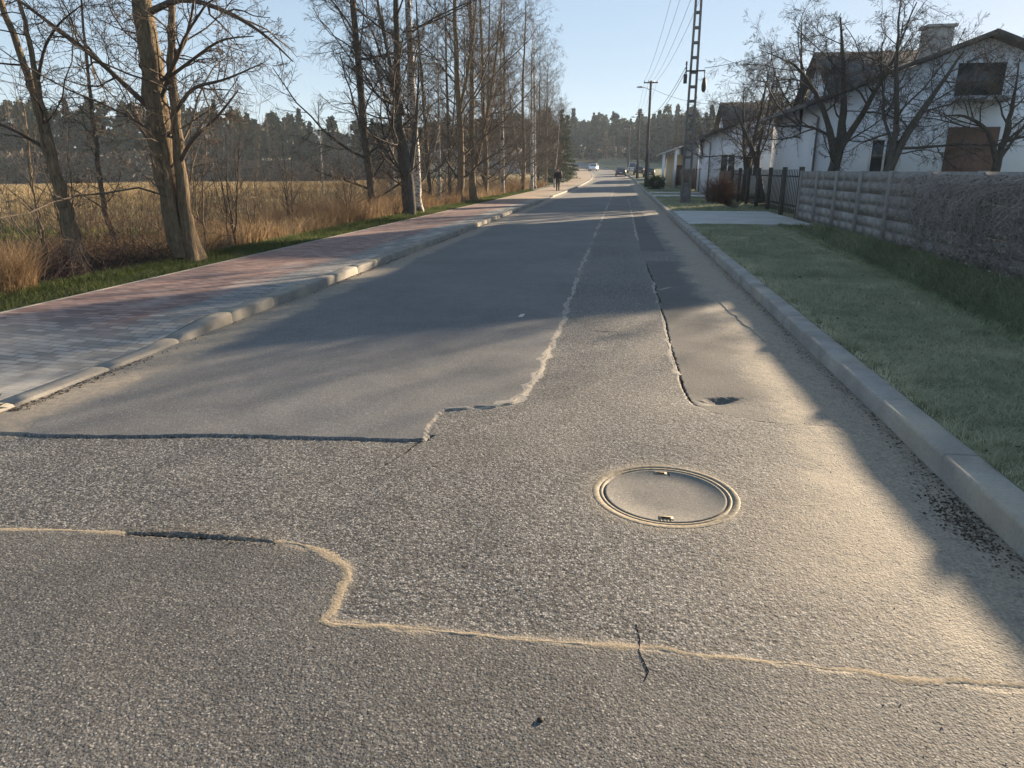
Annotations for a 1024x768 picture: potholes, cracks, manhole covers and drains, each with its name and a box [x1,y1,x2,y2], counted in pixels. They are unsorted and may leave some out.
crack [628,199,749,420]
pothole [693,396,747,407]
crack [0,528,1024,688]
manhole cover [592,465,741,529]
